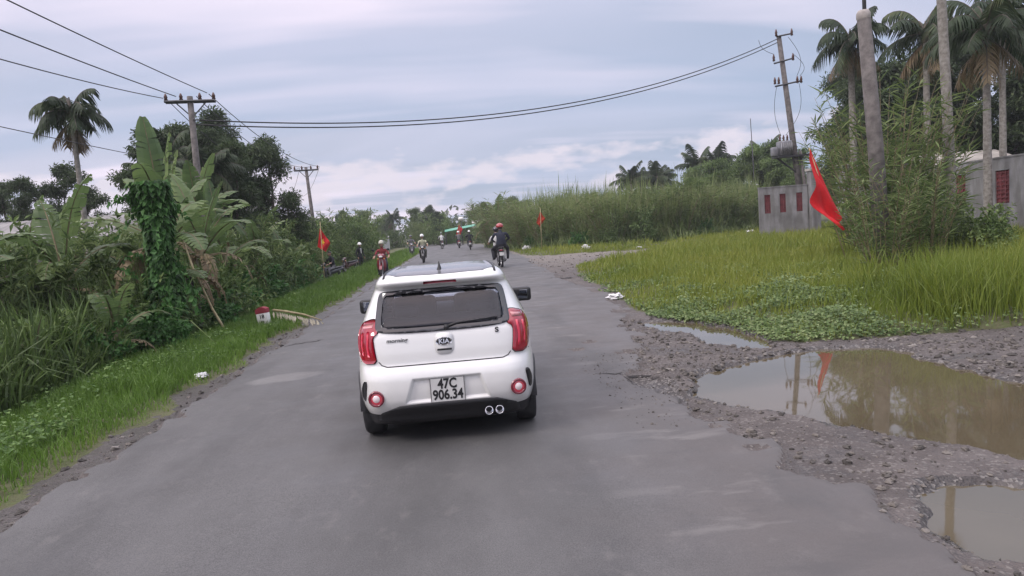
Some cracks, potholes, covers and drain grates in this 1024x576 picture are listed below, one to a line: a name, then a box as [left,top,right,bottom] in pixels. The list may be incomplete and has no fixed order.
pothole [631,319,779,348]
pothole [905,475,1024,563]
pothole [684,343,1024,460]
